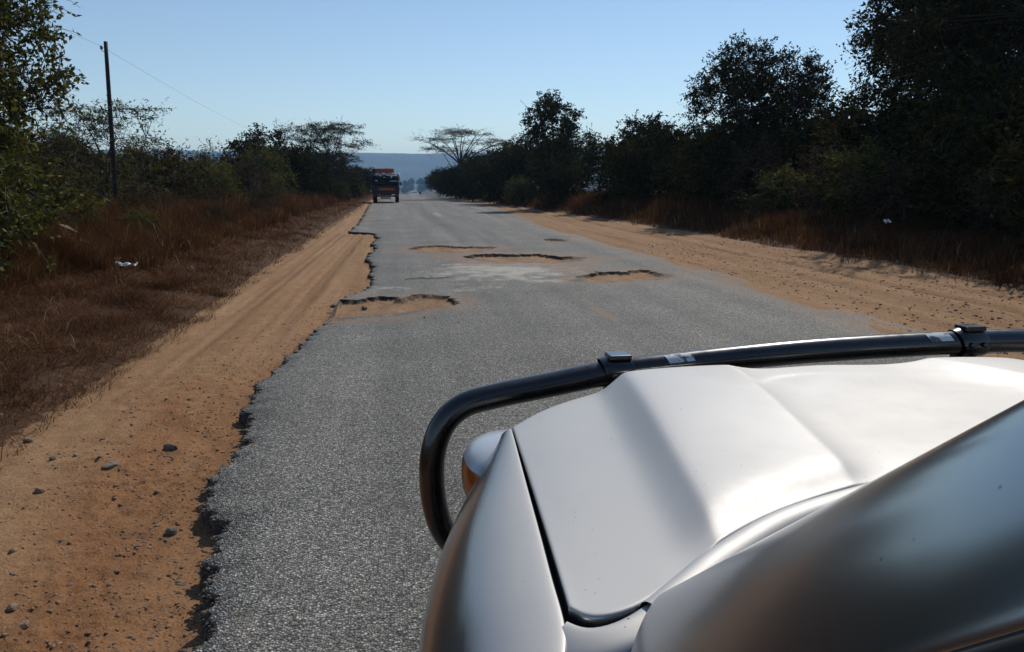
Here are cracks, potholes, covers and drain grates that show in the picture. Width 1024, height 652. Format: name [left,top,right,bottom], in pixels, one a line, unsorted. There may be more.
pothole [326,294,460,322]
pothole [410,245,497,253]
pothole [569,270,674,284]
pothole [464,253,586,264]
